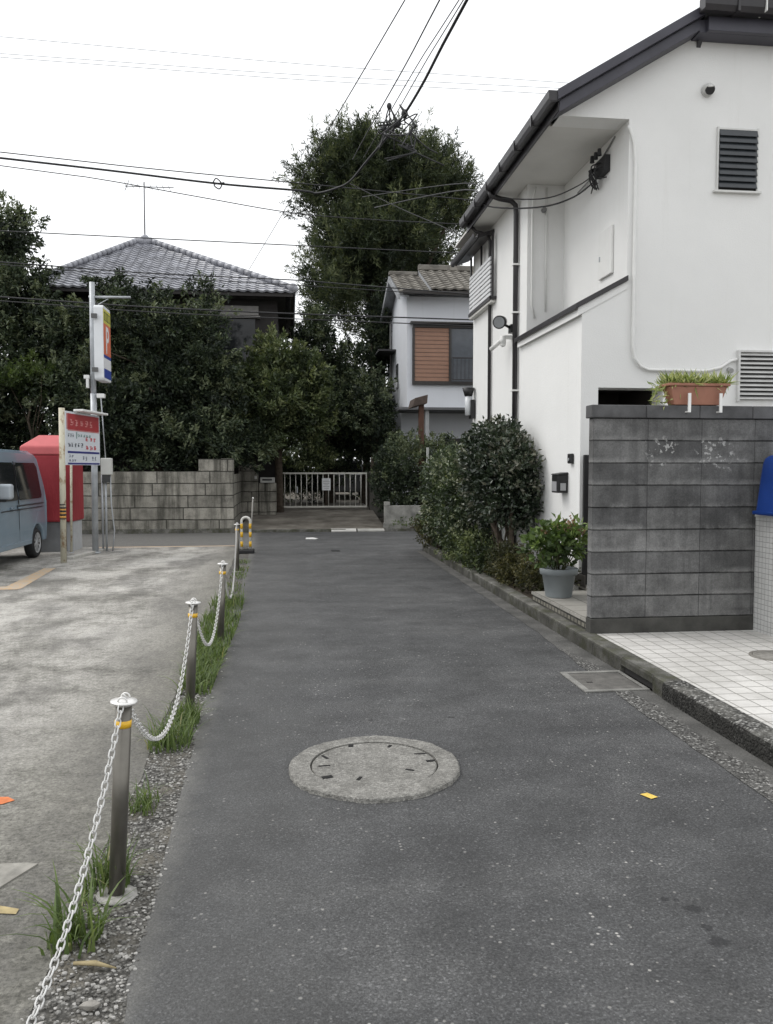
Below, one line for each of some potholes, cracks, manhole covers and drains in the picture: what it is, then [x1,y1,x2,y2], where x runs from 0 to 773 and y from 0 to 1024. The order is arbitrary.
manhole cover [289,735,460,804]
